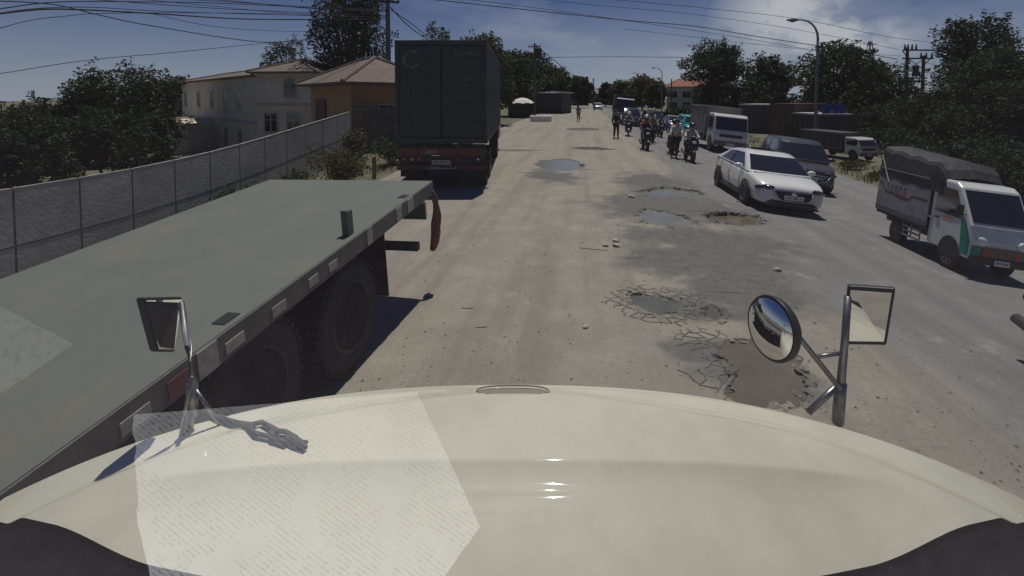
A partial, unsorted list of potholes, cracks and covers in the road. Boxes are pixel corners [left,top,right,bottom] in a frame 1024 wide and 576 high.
pothole [710,333,820,418]
pothole [617,289,690,320]
pothole [629,186,708,198]
pothole [631,207,706,228]
pothole [692,300,731,326]
pothole [533,158,589,172]
pothole [696,210,773,227]
